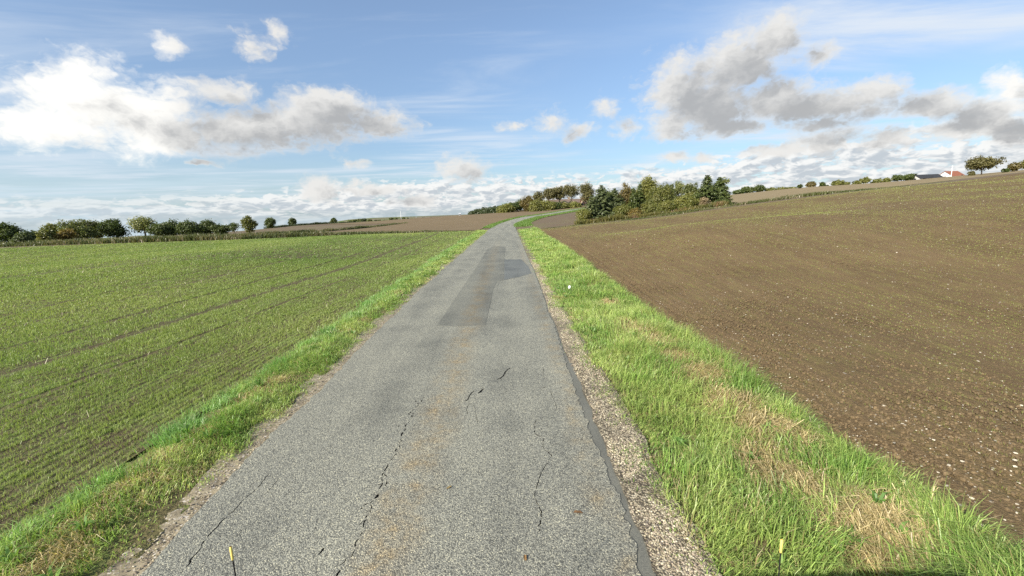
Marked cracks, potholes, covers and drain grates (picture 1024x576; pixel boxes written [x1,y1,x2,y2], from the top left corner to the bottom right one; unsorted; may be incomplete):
crack [319,398,422,576]
crack [181,476,278,573]
crack [534,421,552,531]
